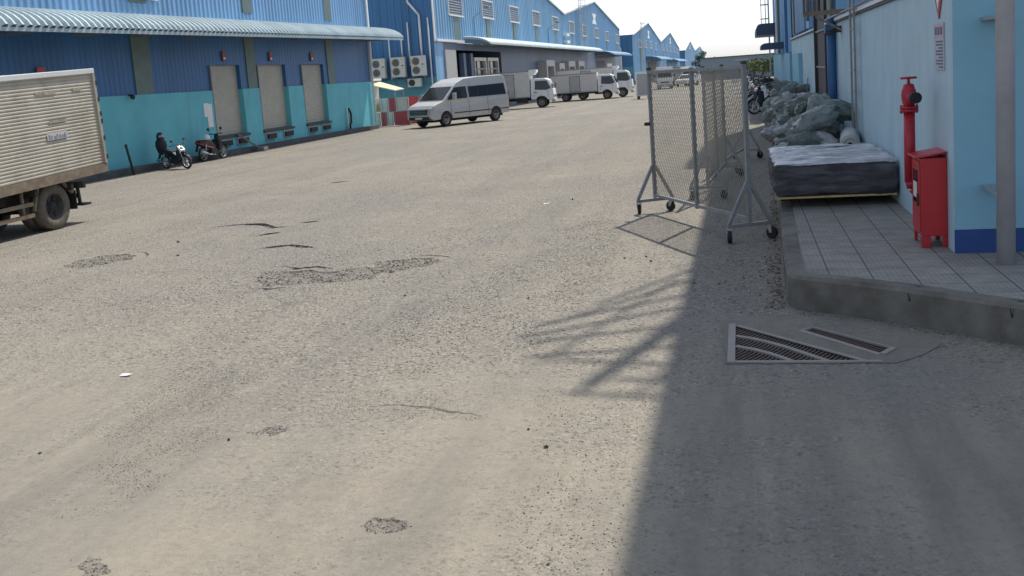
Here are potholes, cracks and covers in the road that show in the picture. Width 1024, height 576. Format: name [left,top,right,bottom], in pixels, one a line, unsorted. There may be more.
pothole [63,254,136,268]
pothole [360,517,413,535]
crack [211,221,318,252]
pothole [74,556,111,576]
pothole [256,266,384,287]
pothole [252,425,287,436]
drain grate [797,326,897,355]
crack [370,404,479,416]
